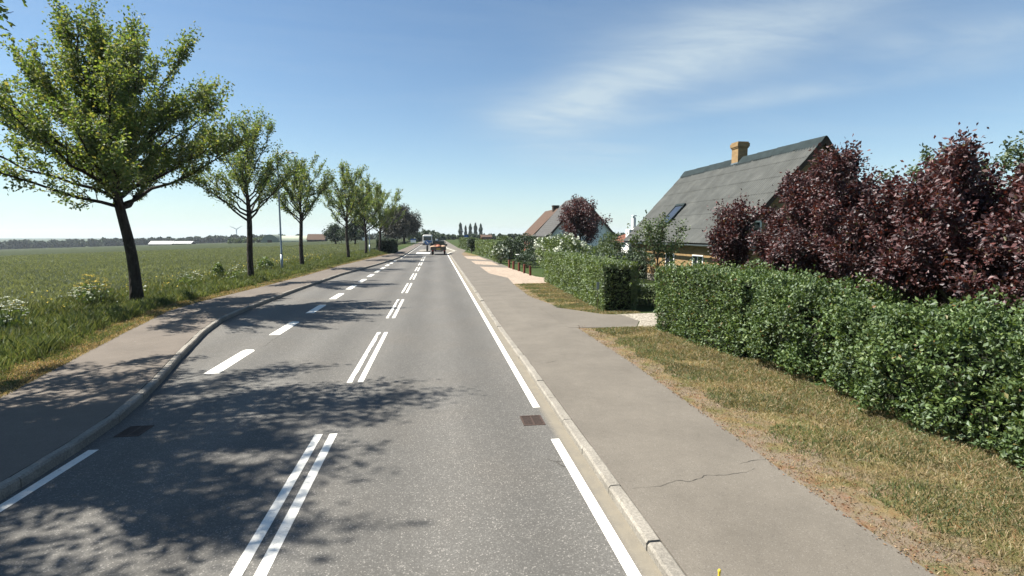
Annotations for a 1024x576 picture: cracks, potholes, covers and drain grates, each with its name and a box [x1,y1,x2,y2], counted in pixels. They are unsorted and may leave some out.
drain grate [114,425,154,437]
drain grate [520,415,546,426]
